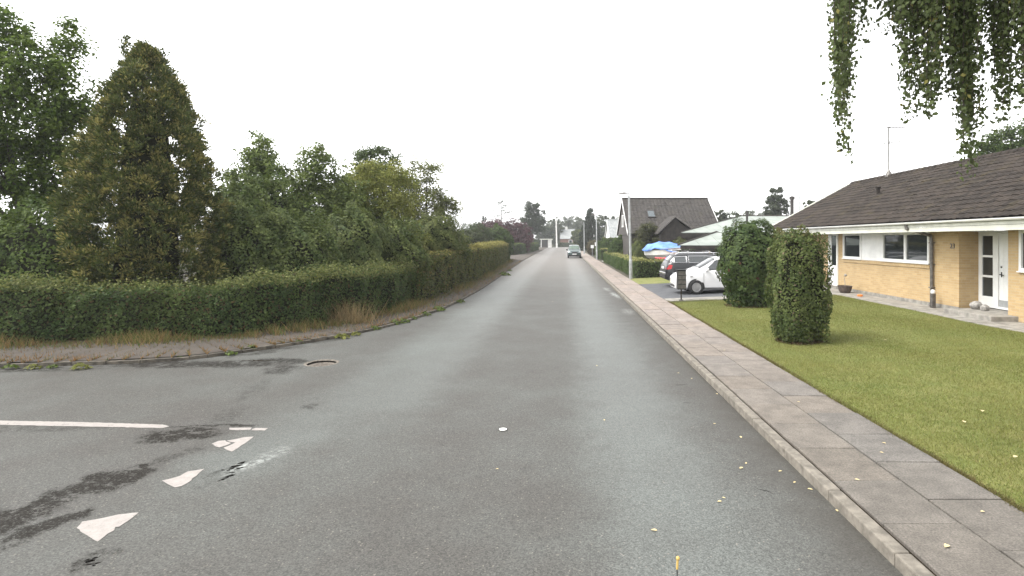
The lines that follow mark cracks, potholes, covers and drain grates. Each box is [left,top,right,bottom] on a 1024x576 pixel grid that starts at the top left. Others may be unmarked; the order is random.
manhole cover [303,359,339,367]
